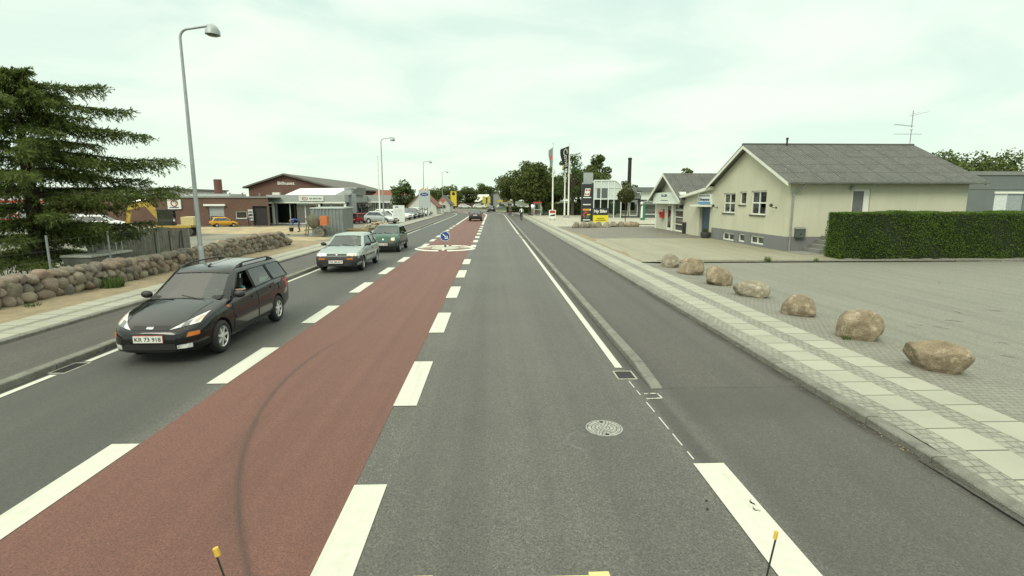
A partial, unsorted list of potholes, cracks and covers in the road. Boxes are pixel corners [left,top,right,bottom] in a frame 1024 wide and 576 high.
drain grate [47,362,91,374]
manhole cover [586,420,623,437]
drain grate [612,371,638,380]
